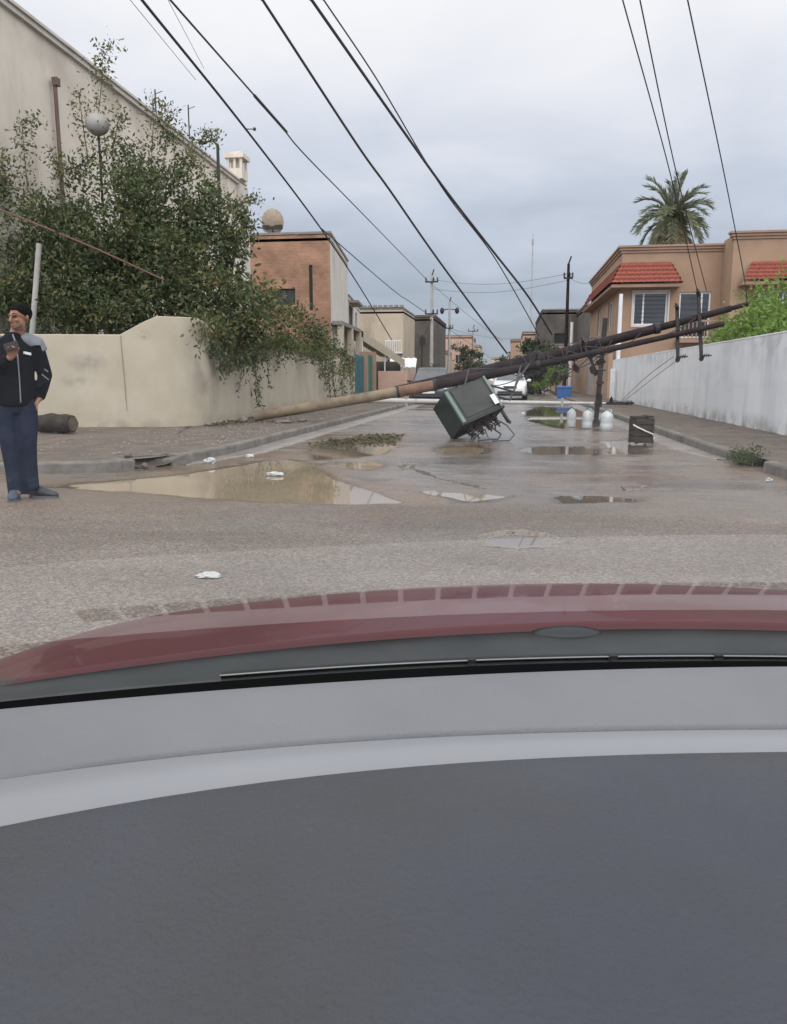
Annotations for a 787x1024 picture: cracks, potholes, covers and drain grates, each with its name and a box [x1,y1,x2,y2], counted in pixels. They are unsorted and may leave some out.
pothole [475,530,568,549]
crack [413,469,486,489]
